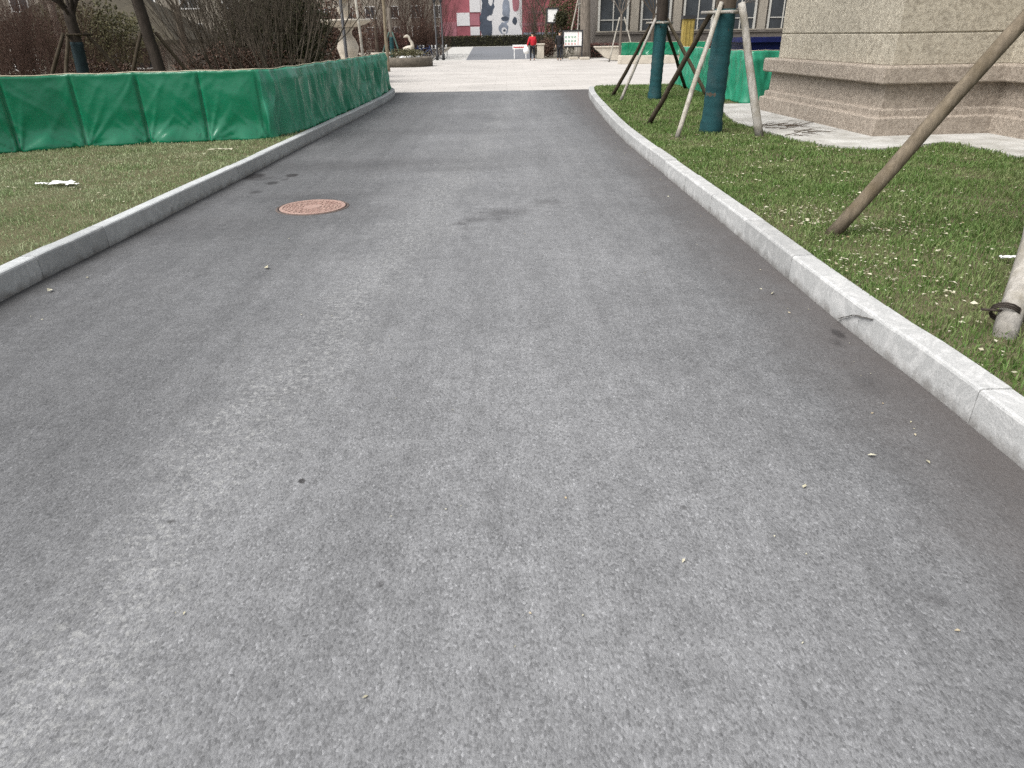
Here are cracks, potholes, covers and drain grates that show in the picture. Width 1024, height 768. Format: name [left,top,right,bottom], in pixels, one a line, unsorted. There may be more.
manhole cover [275,199,349,216]
